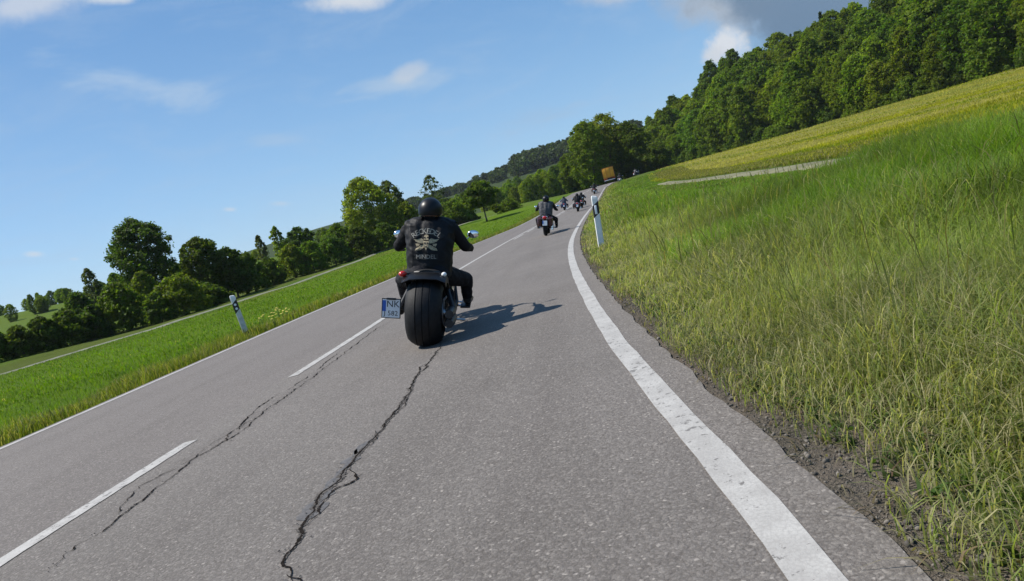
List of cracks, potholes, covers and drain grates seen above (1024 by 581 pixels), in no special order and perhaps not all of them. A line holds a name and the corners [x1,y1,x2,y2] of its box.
crack [281,344,441,581]
crack [52,329,376,567]
